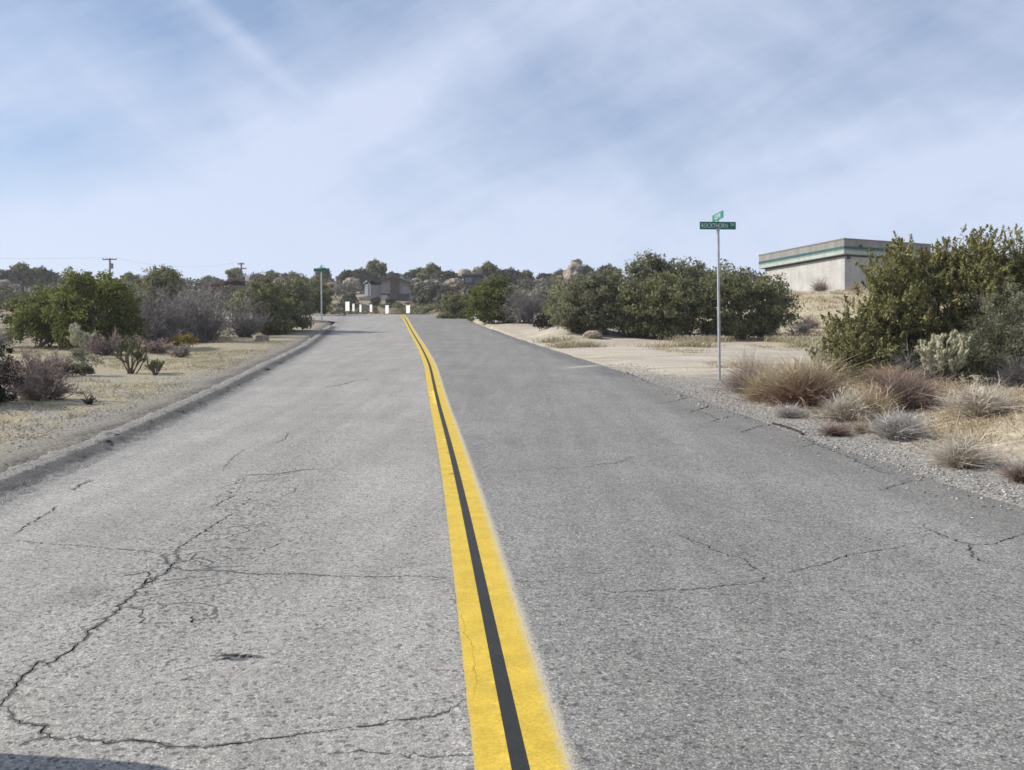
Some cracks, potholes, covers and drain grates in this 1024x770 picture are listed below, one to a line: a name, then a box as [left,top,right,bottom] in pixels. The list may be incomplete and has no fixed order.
crack [601,536,765,594]
crack [655,397,904,489]
crack [0,433,467,748]
crack [929,529,1023,562]
